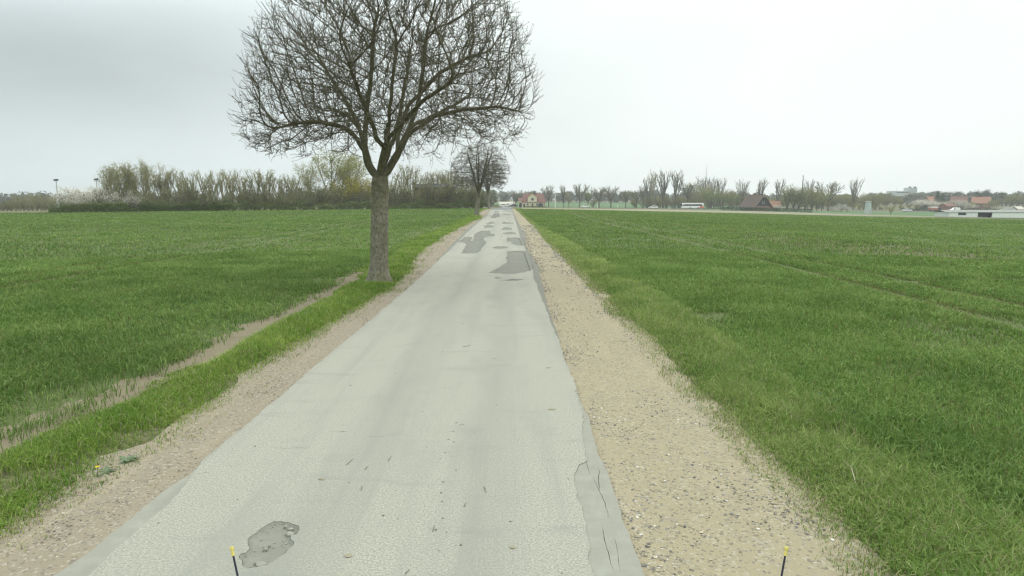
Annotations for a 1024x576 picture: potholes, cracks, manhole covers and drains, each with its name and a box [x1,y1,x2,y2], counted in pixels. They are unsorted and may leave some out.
pothole [240,522,299,568]
